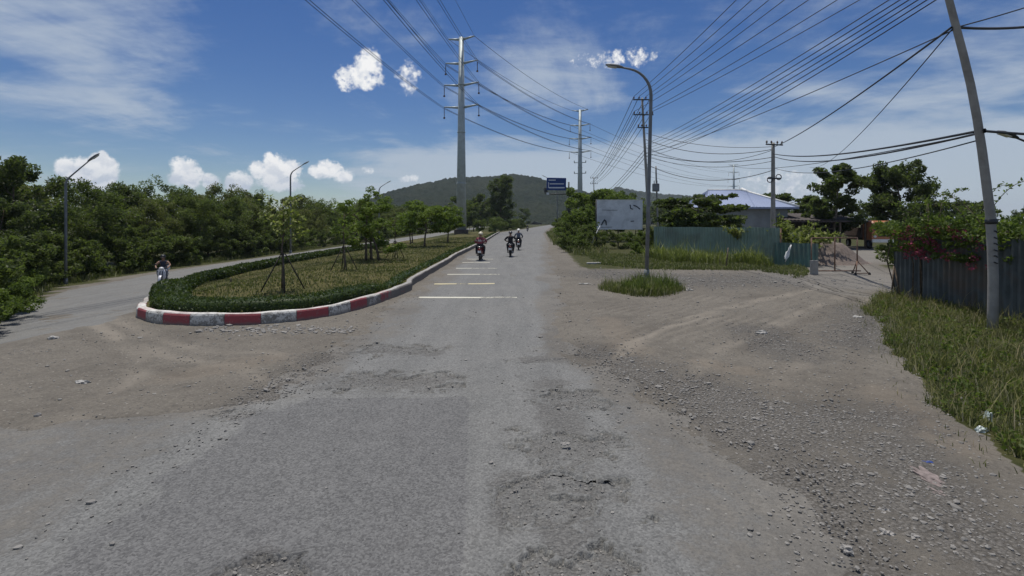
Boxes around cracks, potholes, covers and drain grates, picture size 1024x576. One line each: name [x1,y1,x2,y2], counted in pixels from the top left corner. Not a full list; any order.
pothole [501,536,666,576]
pothole [500,386,626,417]
pothole [499,427,635,484]
pothole [337,342,457,360]
pothole [194,548,317,576]
pothole [485,463,666,535]
pothole [287,367,478,400]
